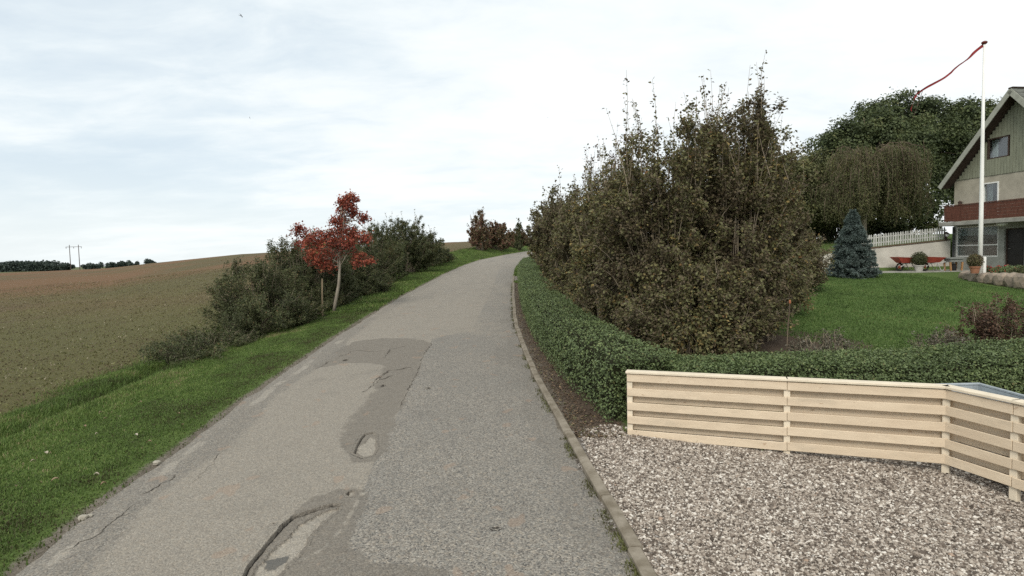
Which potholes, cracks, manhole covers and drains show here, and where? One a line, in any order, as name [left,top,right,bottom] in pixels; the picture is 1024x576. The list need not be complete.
crack [321,344,432,406]
pothole [351,431,379,458]
pothole [239,502,345,576]
crack [60,474,176,553]
